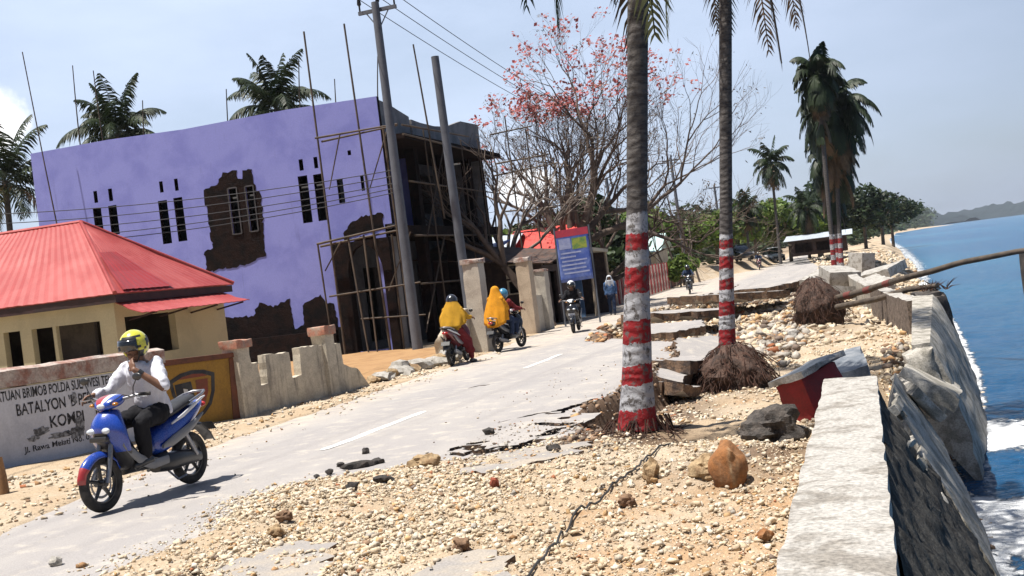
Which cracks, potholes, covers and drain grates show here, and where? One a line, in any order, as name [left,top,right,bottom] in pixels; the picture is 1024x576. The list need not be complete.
crack [451,399,593,457]
